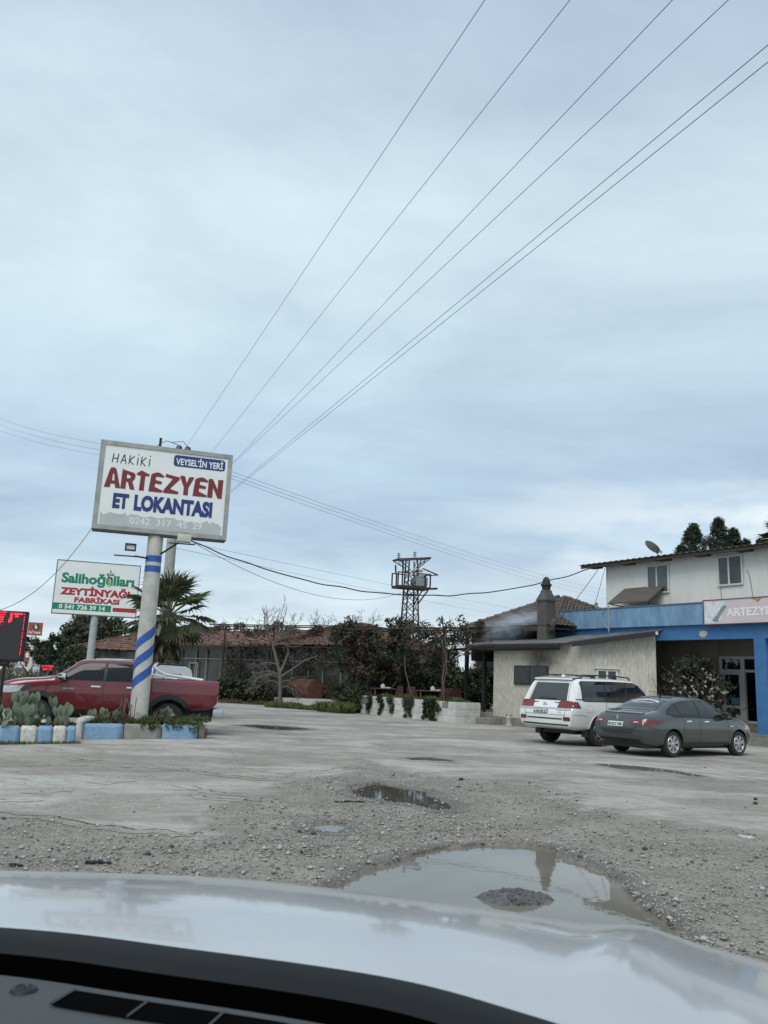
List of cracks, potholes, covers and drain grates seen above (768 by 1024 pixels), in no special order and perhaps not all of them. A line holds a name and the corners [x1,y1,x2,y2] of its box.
pothole [286,818,369,836]
pothole [299,839,717,949]
pothole [584,763,718,778]
pothole [336,780,469,813]
